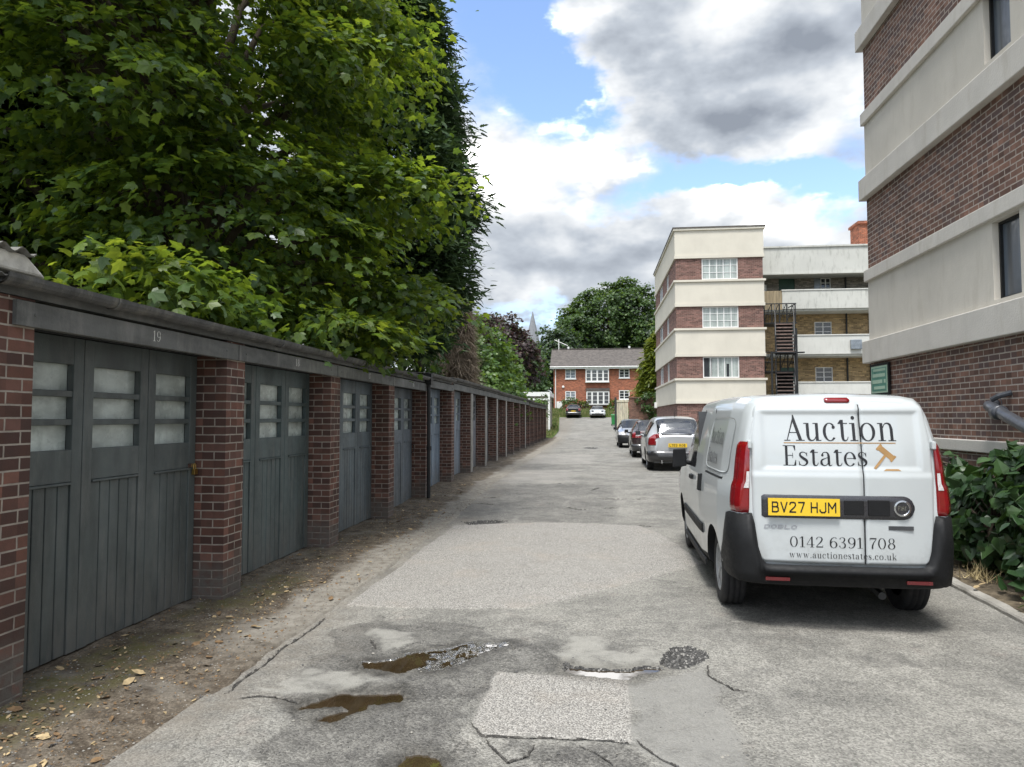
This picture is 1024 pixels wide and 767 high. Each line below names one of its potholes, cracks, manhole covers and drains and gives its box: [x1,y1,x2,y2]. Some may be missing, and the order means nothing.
pothole [562,662,663,680]
crack [223,616,328,703]
pothole [295,690,409,723]
pothole [395,750,444,767]
crack [470,721,677,767]
crack [707,665,743,691]
pothole [359,641,510,674]
